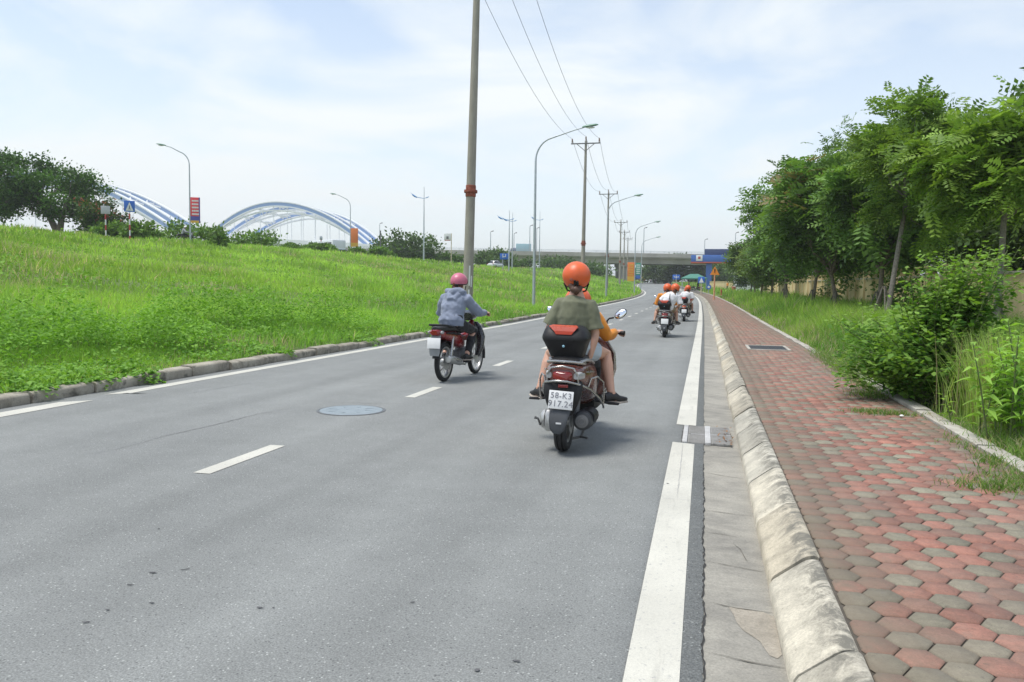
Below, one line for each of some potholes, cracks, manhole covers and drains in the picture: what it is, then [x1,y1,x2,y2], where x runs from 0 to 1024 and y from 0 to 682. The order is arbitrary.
manhole cover [316,405,386,416]
